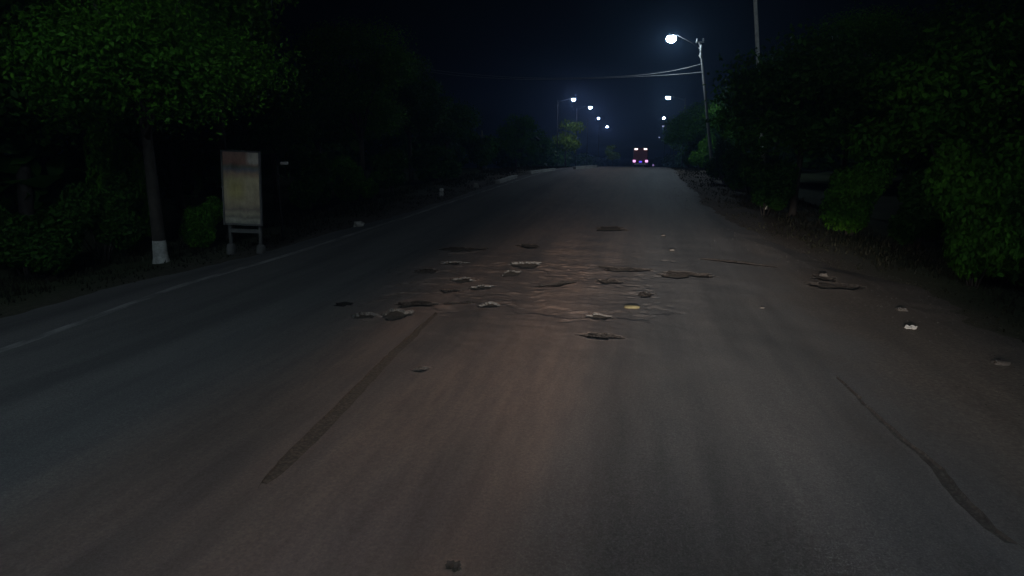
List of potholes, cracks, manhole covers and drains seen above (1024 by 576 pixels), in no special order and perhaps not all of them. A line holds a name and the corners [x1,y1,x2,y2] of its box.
crack [828,373,1024,556]
pothole [375,308,419,322]
pothole [392,300,444,309]
pothole [572,331,630,341]
pothole [803,281,870,291]
pothole [581,312,619,321]
pothole [474,301,504,309]
pothole [655,270,719,280]
pothole [507,261,544,269]
